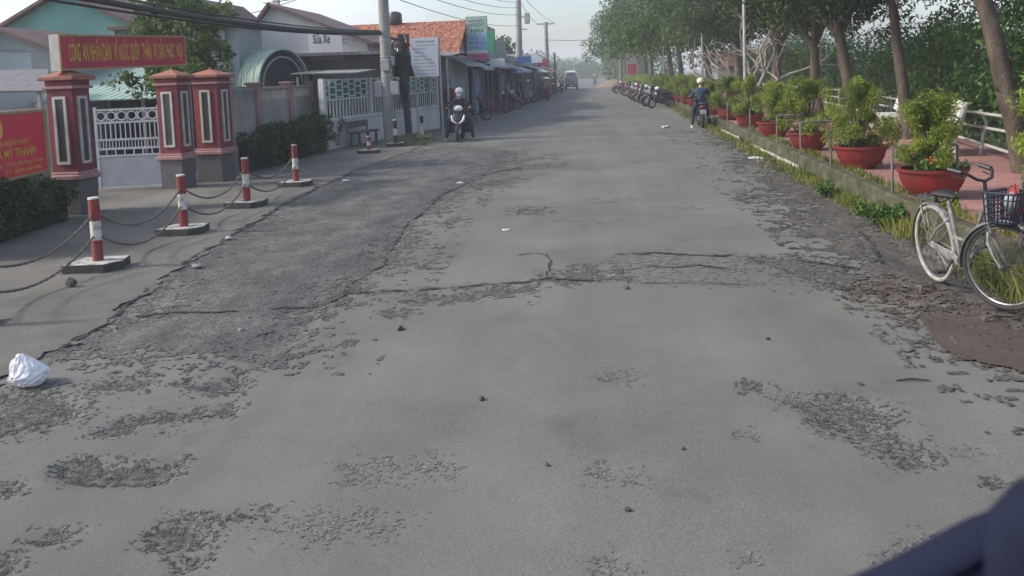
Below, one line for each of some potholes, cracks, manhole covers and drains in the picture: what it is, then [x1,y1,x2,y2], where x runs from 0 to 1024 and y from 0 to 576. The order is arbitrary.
pothole [178,369,275,399]
pothole [780,390,937,449]
crack [616,252,776,284]
pothole [80,373,164,395]
pothole [26,453,198,489]
crack [50,167,603,352]
pothole [159,374,202,387]
